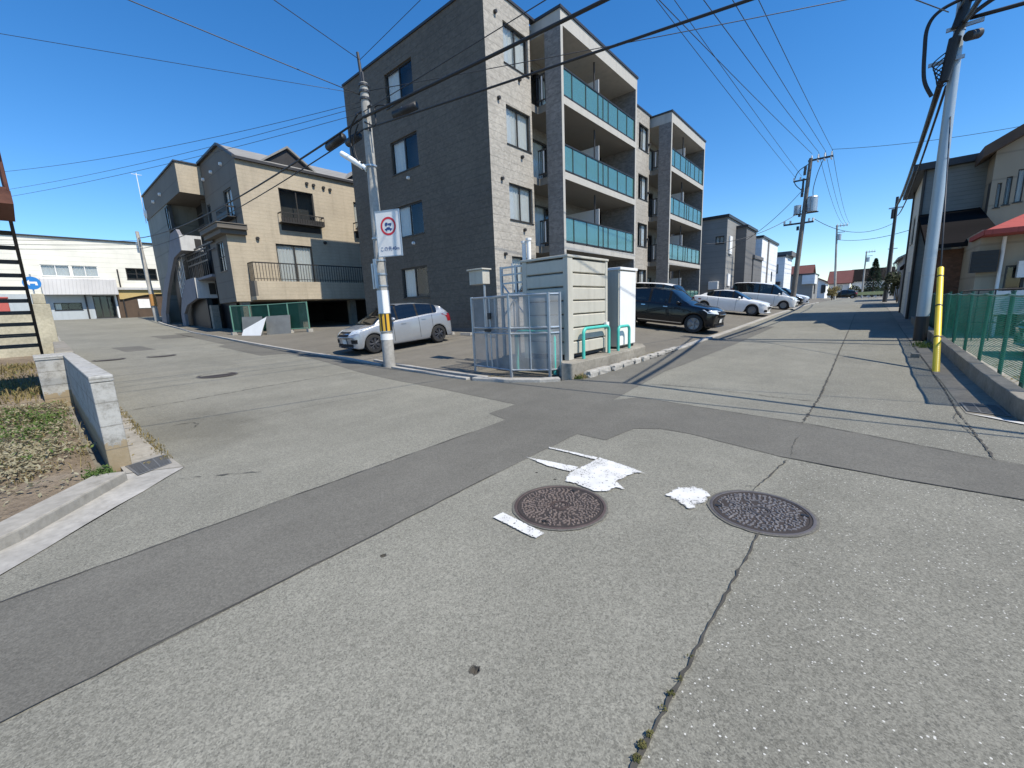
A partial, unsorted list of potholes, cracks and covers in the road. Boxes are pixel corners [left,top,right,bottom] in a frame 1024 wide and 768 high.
drain grate [960,402,1012,417]
crack [630,532,760,768]
manhole cover [707,489,820,537]
manhole cover [512,485,609,531]
drain grate [125,454,172,475]
crack [898,324,995,459]
crack [664,315,855,491]
